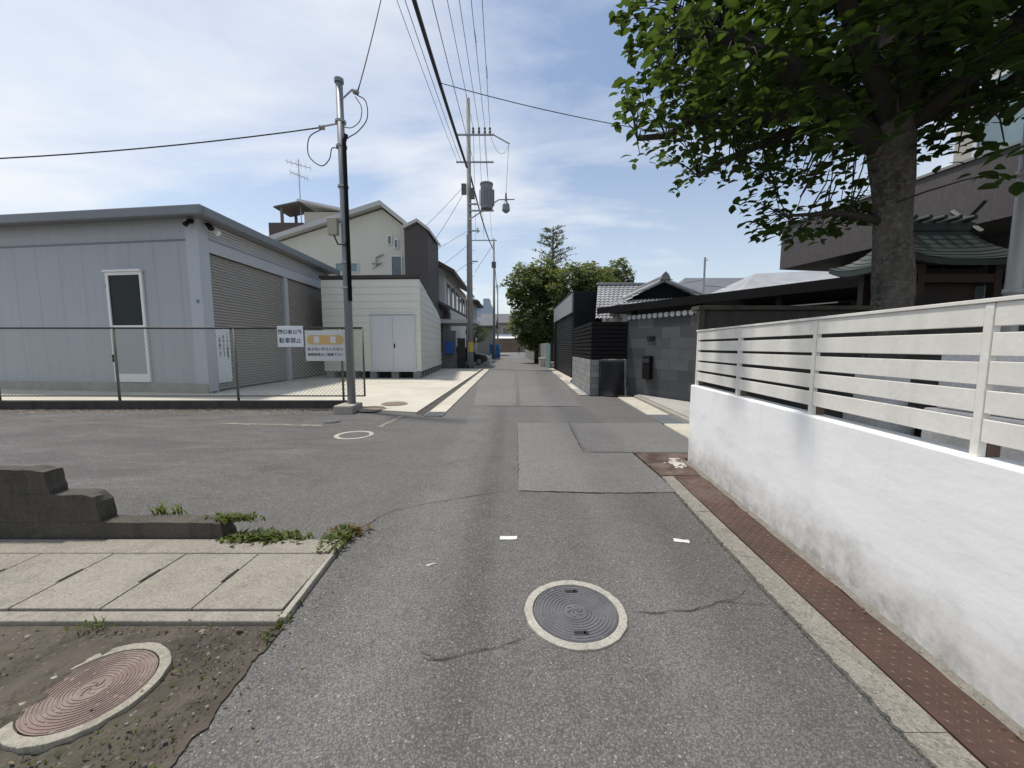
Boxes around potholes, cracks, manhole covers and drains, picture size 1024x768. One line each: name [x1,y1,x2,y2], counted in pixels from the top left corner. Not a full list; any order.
manhole cover [524,580,628,652]
crack [418,637,523,660]
manhole cover [0,642,172,754]
crack [629,590,767,613]
